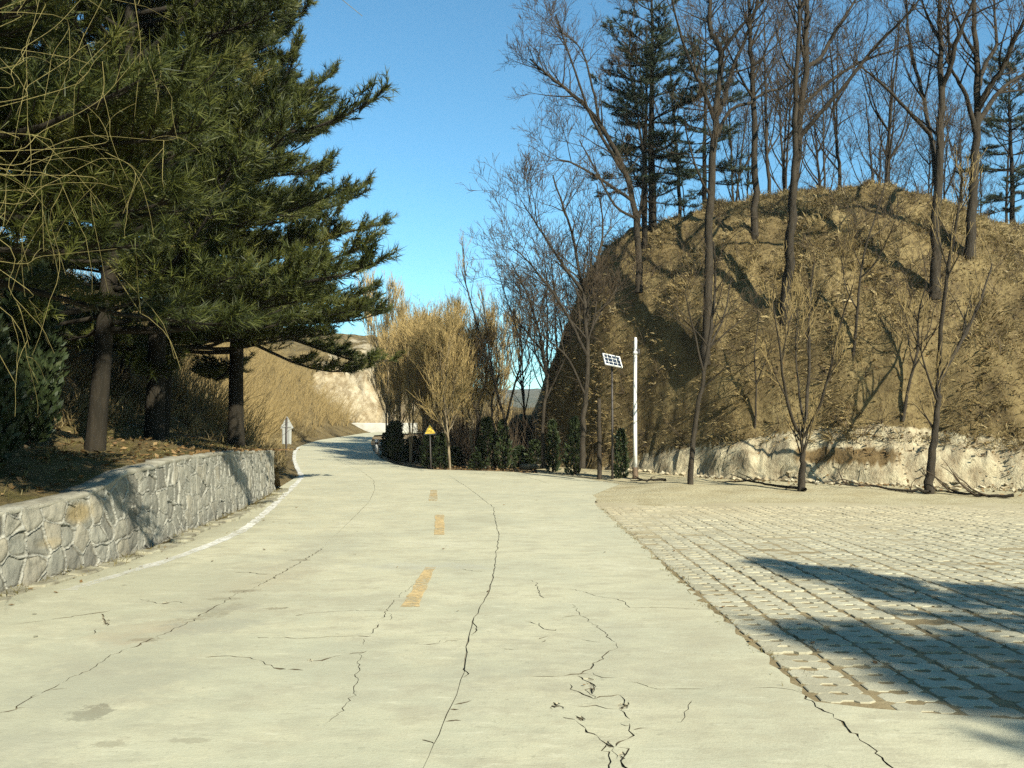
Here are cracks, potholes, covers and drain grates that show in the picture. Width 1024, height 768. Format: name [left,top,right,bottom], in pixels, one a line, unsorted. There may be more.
crack [18,610,110,634]
crack [533,606,656,768]
crack [210,584,414,724]
